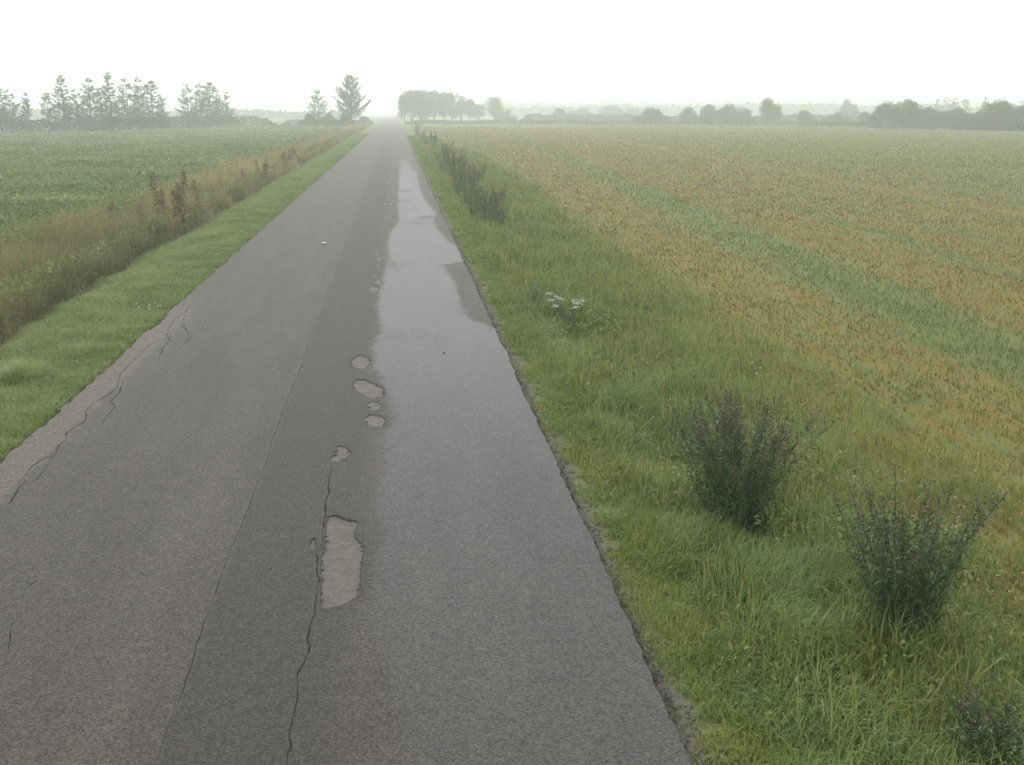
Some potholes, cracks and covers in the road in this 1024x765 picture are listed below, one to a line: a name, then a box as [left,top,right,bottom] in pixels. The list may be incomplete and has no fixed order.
pothole [352,379,386,398]
pothole [364,414,387,427]
crack [154,171,373,765]
pothole [366,401,382,411]
pothole [319,515,364,608]
crack [1,561,38,669]
pothole [329,445,351,463]
pothole [350,354,371,369]
crack [10,304,202,502]
